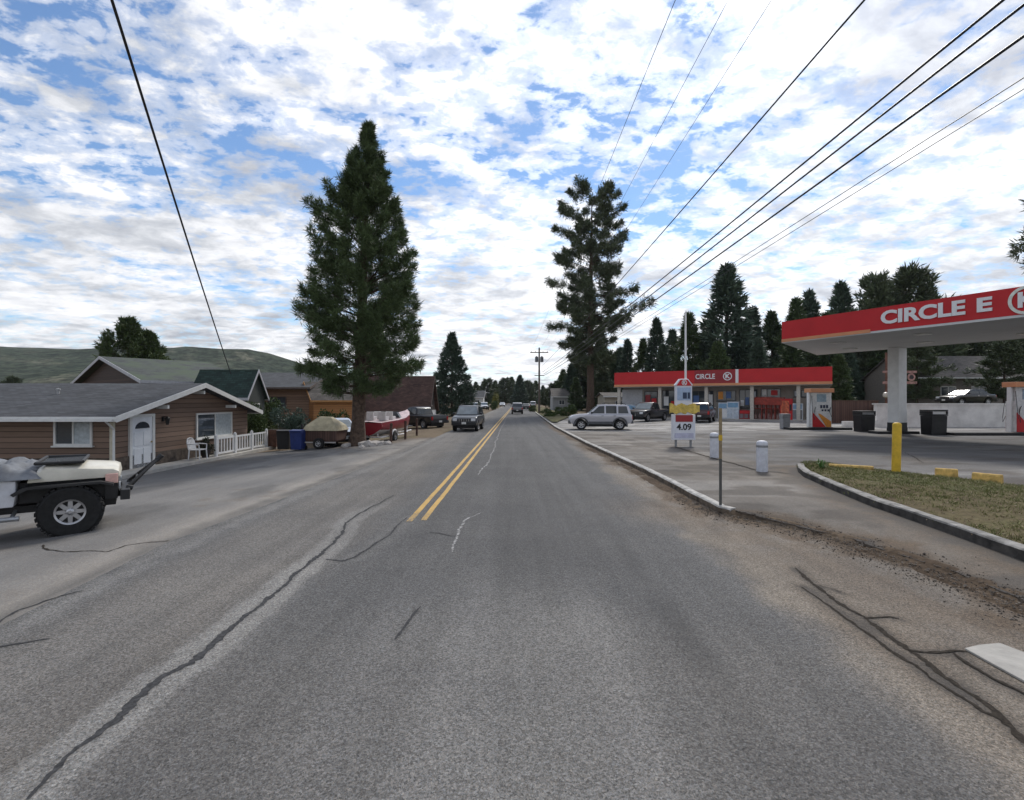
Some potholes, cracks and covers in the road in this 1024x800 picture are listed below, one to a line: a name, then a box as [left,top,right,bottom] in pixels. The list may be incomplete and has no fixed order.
crack [430,513,480,552]
crack [796,568,1024,743]
crack [394,606,421,640]
crack [478,418,507,474]
crack [0,495,407,799]
